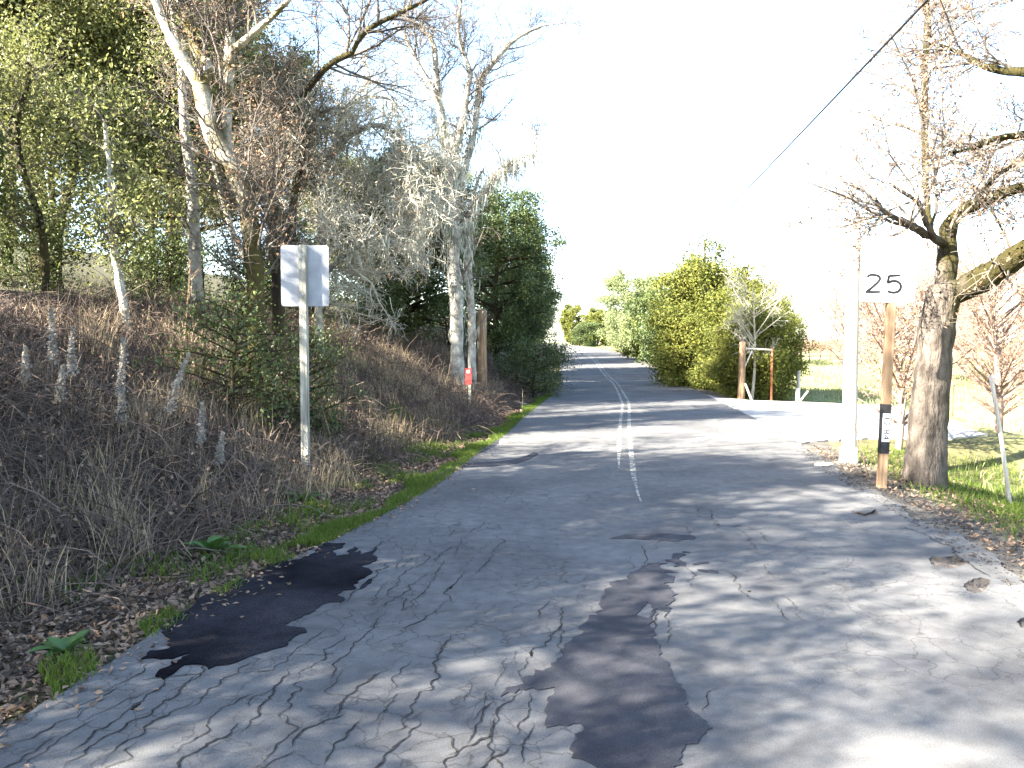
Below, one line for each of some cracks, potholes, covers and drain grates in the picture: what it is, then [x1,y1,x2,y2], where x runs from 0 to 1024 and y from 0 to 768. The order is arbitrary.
pothole [928,556,966,569]
crack [653,611,672,643]
crack [729,572,802,620]
crack [684,509,769,549]
crack [904,526,990,577]
crack [4,523,565,768]
pothole [964,577,991,593]
